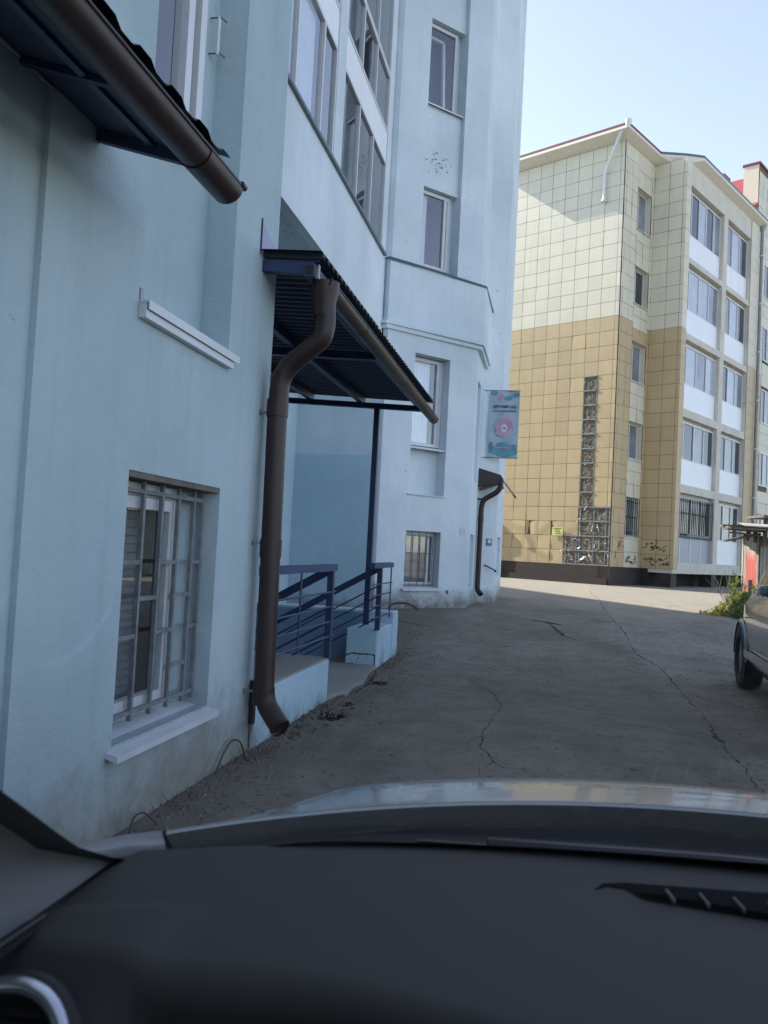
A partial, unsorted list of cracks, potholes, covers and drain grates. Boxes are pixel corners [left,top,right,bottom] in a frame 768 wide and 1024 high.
crack [482,620,576,648]
crack [464,680,514,773]
crack [590,590,764,792]
